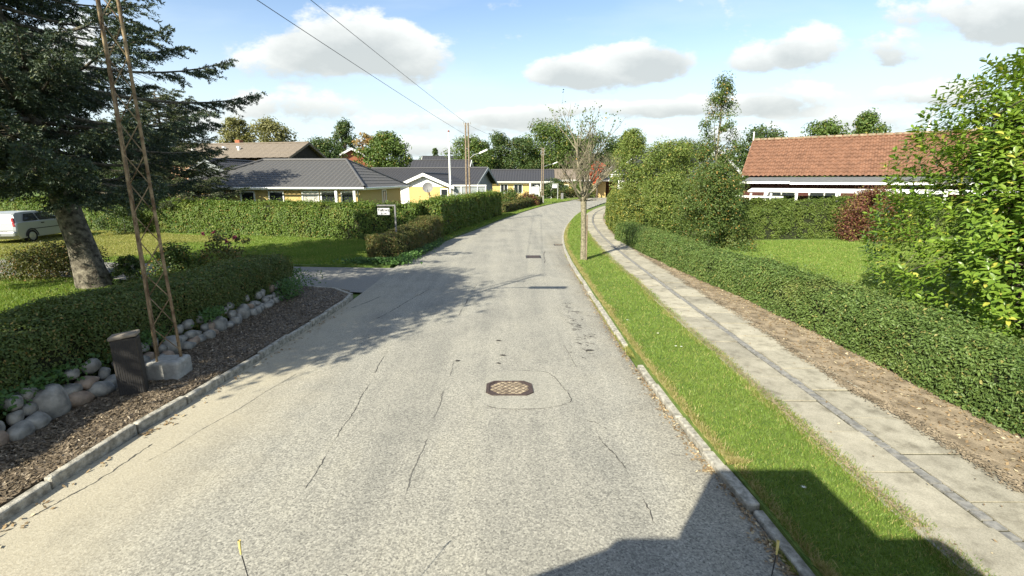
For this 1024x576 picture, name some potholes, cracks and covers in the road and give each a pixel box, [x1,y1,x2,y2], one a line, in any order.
crack [591,421,653,521]
crack [35,444,152,515]
crack [266,358,383,545]
crack [374,362,454,572]
manhole cover [486,381,534,396]
